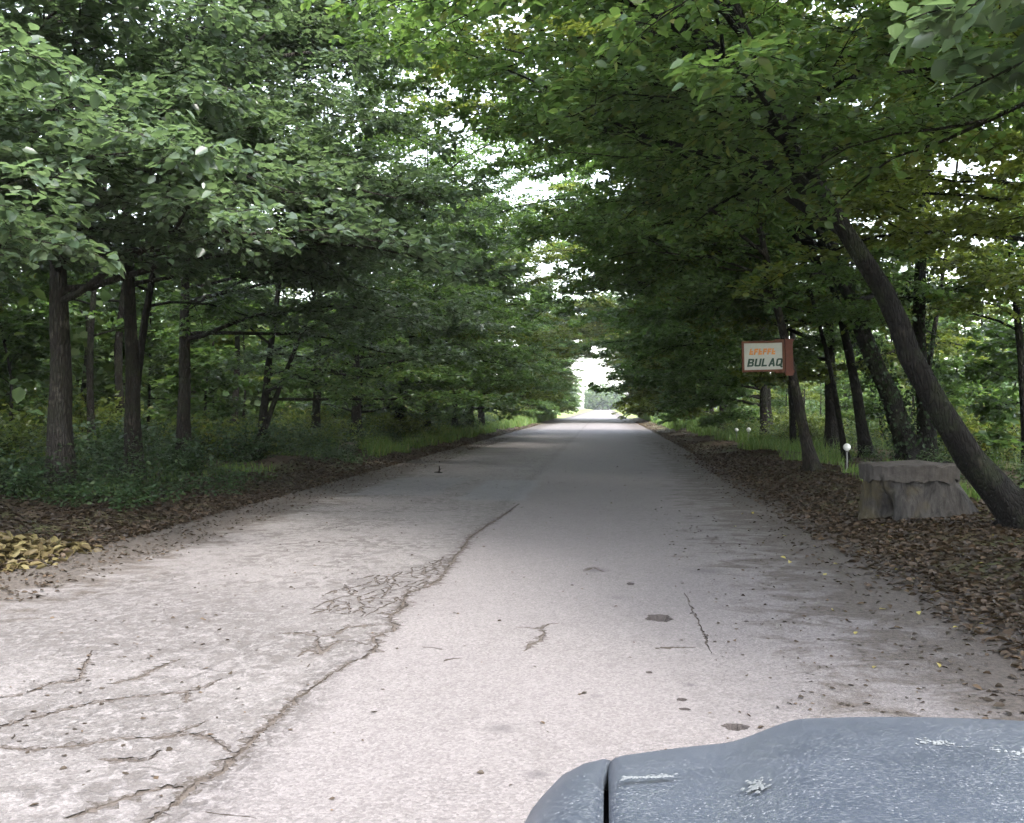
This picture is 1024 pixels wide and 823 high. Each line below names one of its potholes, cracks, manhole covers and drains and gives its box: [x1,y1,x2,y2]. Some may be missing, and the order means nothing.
crack [655,593,712,653]
crack [0,504,519,823]
pothole [721,723,750,731]
pothole [645,614,674,622]
crack [524,623,555,651]
